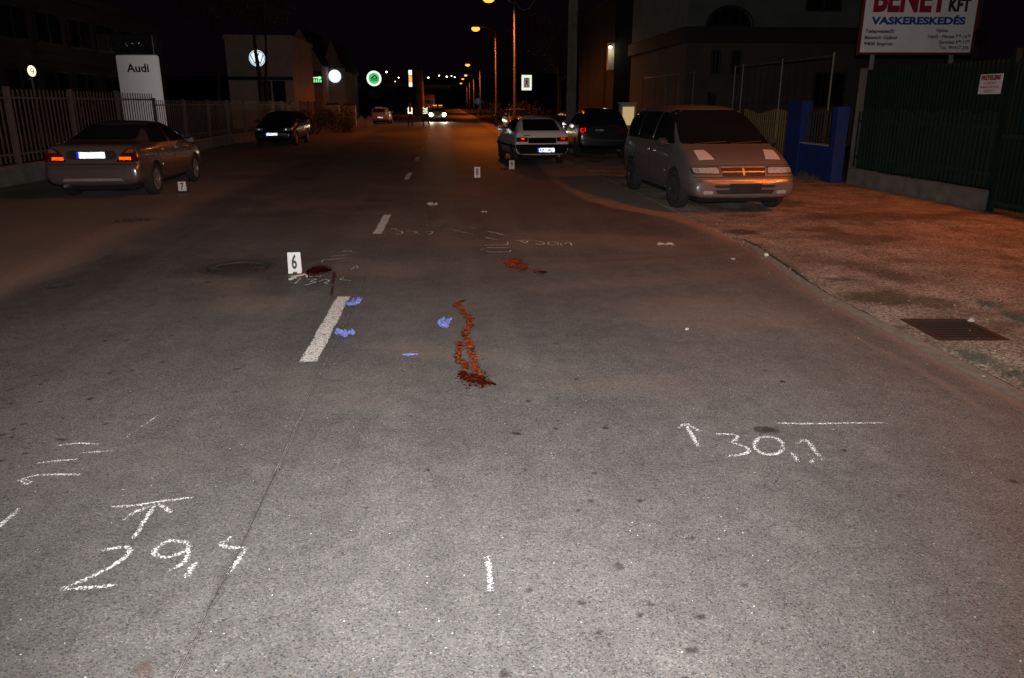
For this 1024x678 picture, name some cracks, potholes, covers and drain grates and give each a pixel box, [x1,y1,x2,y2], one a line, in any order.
drain grate [900,318,1010,379]
manhole cover [198,260,277,275]
